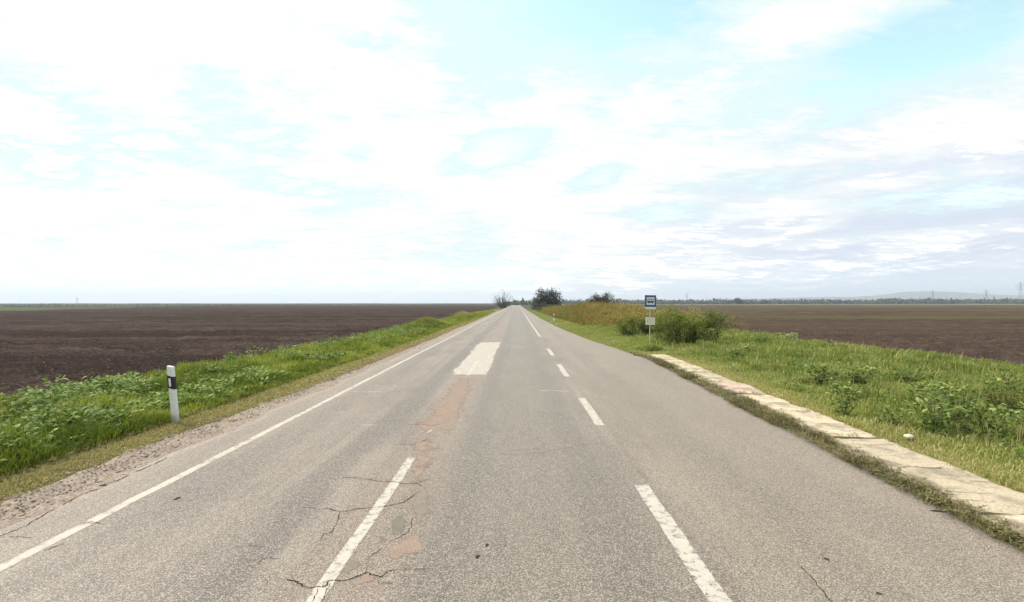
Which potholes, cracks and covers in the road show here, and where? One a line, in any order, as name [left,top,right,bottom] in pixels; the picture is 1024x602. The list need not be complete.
crack [287,477,443,601]
